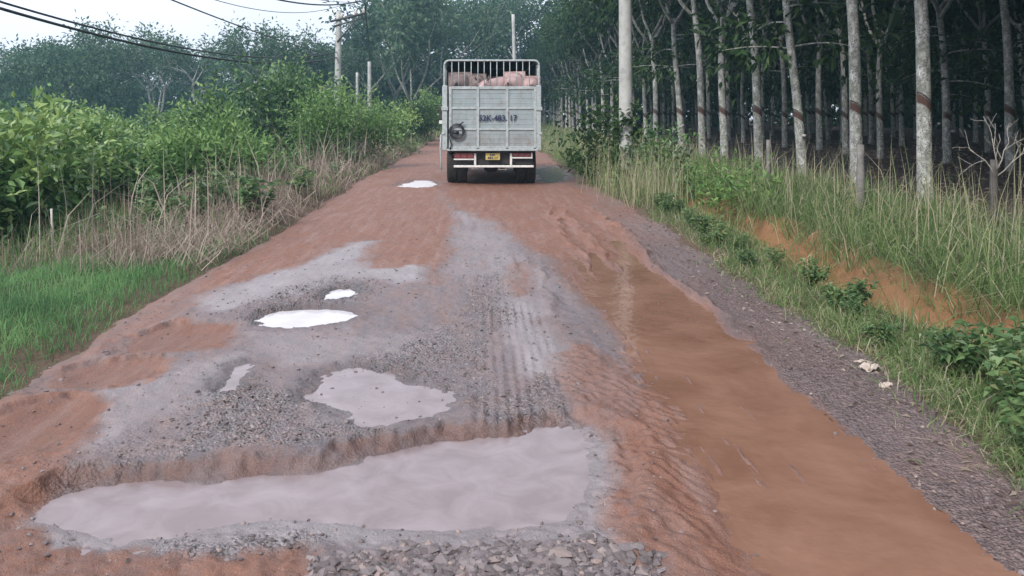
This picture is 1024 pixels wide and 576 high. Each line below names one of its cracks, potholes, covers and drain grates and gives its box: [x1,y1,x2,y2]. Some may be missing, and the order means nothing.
pothole [280,354,484,432]
pothole [239,300,375,330]
pothole [0,401,666,576]
pothole [386,178,451,188]
